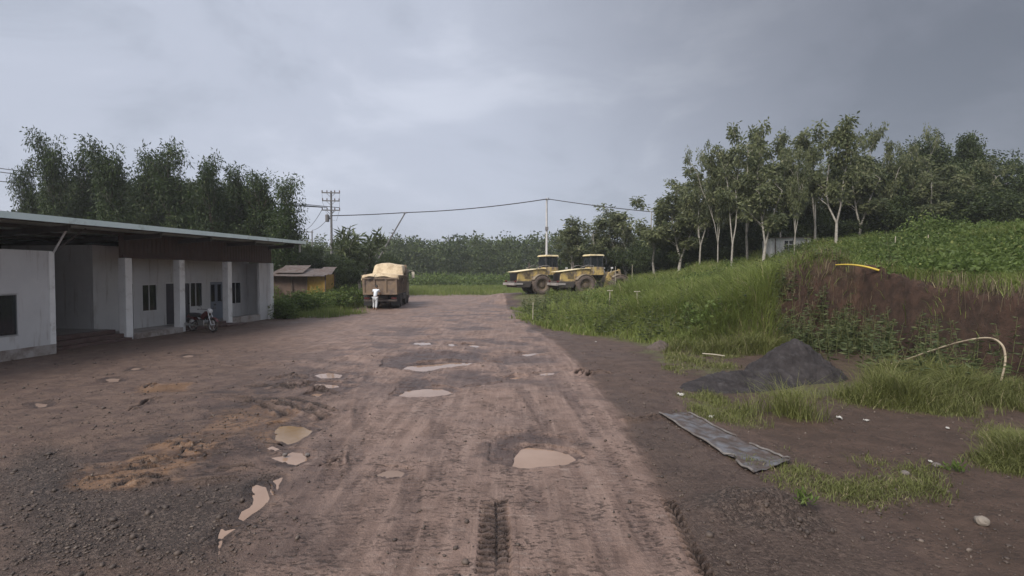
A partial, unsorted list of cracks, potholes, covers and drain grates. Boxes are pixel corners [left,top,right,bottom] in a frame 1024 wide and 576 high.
pothole [94,376,129,384]
pothole [385,375,464,398]
pothole [297,380,349,391]
pothole [260,418,328,446]
pothole [377,350,506,372]
pothole [305,369,353,380]
pothole [484,428,591,471]
pothole [217,478,286,526]
pothole [254,446,320,470]
